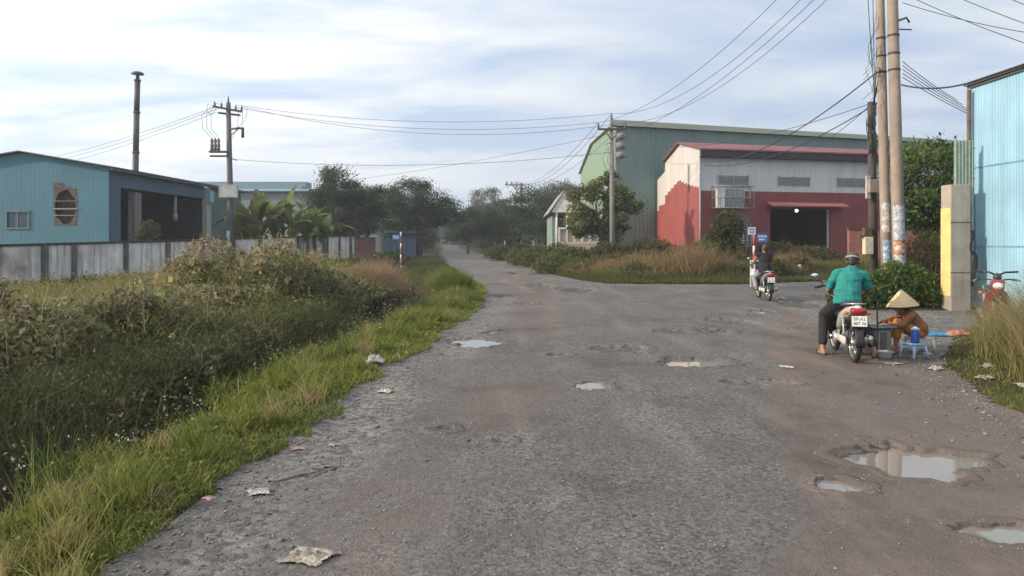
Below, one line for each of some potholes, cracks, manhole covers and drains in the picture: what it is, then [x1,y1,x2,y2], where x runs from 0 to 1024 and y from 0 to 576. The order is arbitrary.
pothole [436,336,518,350]
pothole [547,286,606,295]
pothole [579,343,658,356]
pothole [927,515,1024,550]
pothole [646,355,750,369]
pothole [749,377,809,387]
pothole [562,380,621,392]
pothole [416,422,467,435]
pothole [813,435,1005,488]
pothole [641,327,702,335]
pothole [797,471,884,497]
